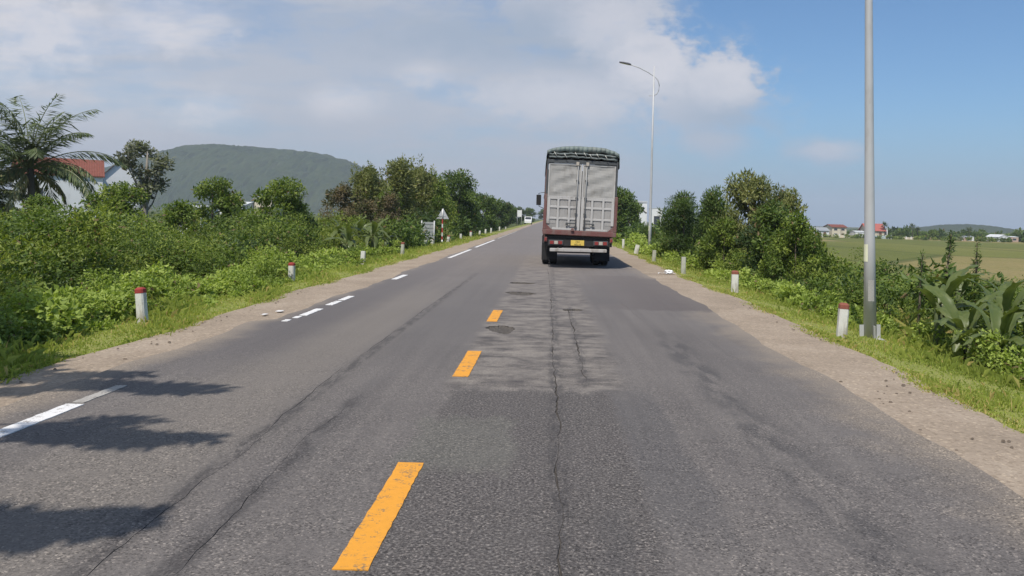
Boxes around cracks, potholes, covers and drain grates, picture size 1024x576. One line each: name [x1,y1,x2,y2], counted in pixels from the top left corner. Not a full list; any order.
pothole [486,325,515,334]
crack [567,308,587,382]
